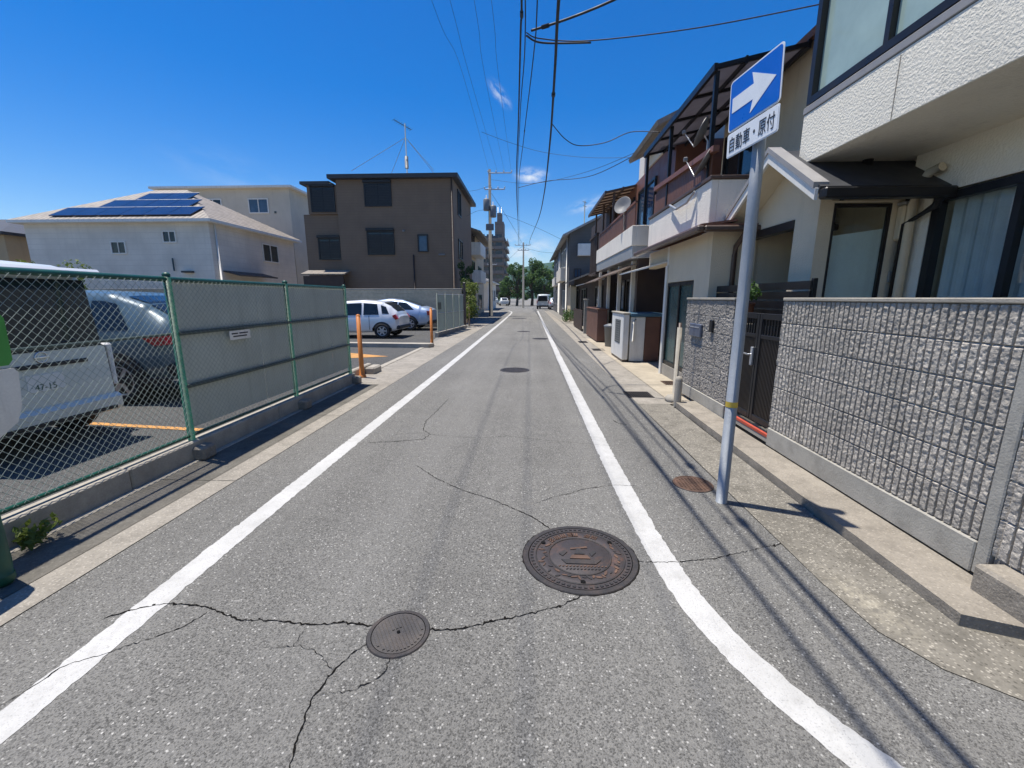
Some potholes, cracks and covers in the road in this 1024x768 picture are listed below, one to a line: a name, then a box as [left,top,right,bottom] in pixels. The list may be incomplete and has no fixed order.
crack [421,468,633,528]
crack [642,543,782,563]
crack [431,595,581,631]
manhole cover [672,476,714,493]
manhole cover [522,526,640,596]
crack [1,602,390,768]
manhole cover [366,610,430,659]
